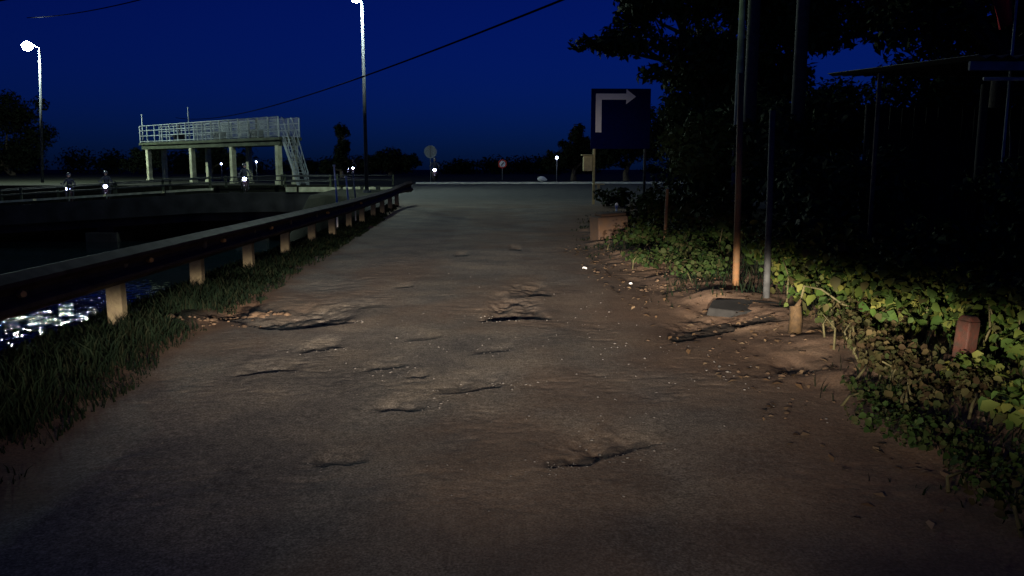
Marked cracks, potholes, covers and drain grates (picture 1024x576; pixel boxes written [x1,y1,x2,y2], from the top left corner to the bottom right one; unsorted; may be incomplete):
pothole [296,343,344,354]
pothole [480,308,550,322]
pothole [433,381,506,394]
pothole [362,363,409,372]
pothole [304,456,370,468]
pothole [231,366,300,377]
pothole [249,314,358,331]
pothole [540,438,660,469]
